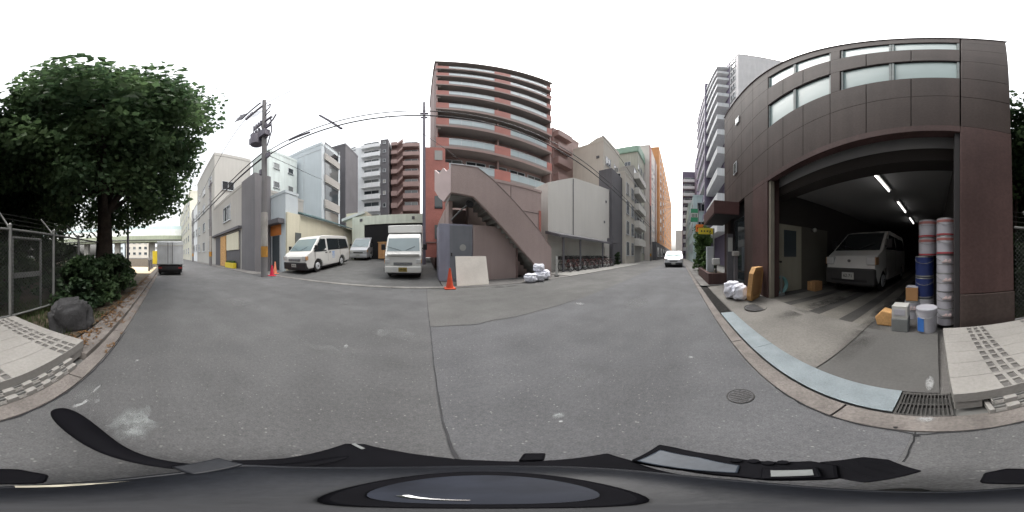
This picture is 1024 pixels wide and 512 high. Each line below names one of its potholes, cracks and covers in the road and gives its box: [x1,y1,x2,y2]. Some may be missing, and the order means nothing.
manhole cover [726,389,755,403]
drain grate [893,392,954,417]
manhole cover [744,304,767,312]
